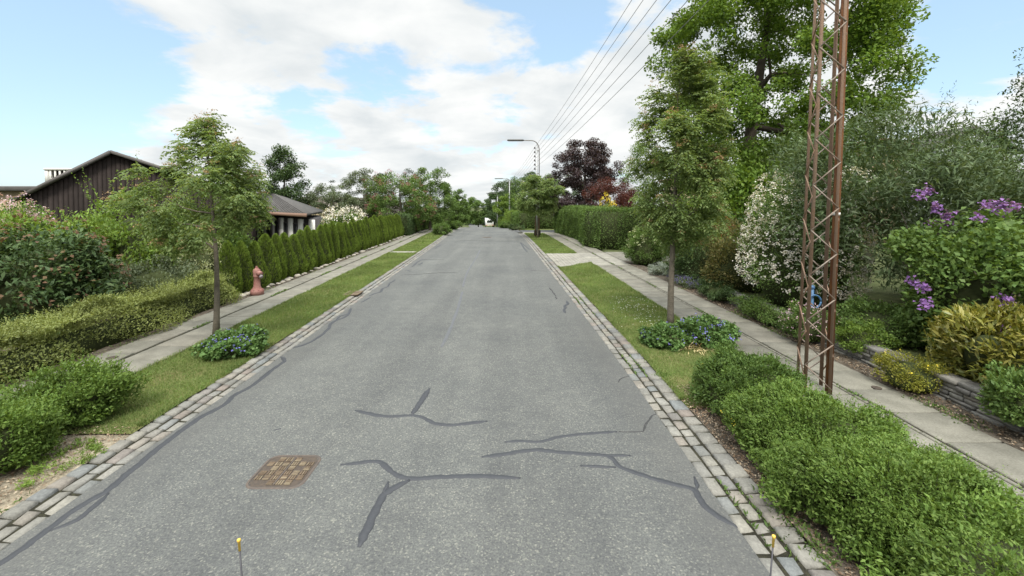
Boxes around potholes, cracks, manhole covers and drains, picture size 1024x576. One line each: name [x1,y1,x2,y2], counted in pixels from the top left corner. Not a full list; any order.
crack [619,414,656,432]
manhole cover [245,455,321,489]
